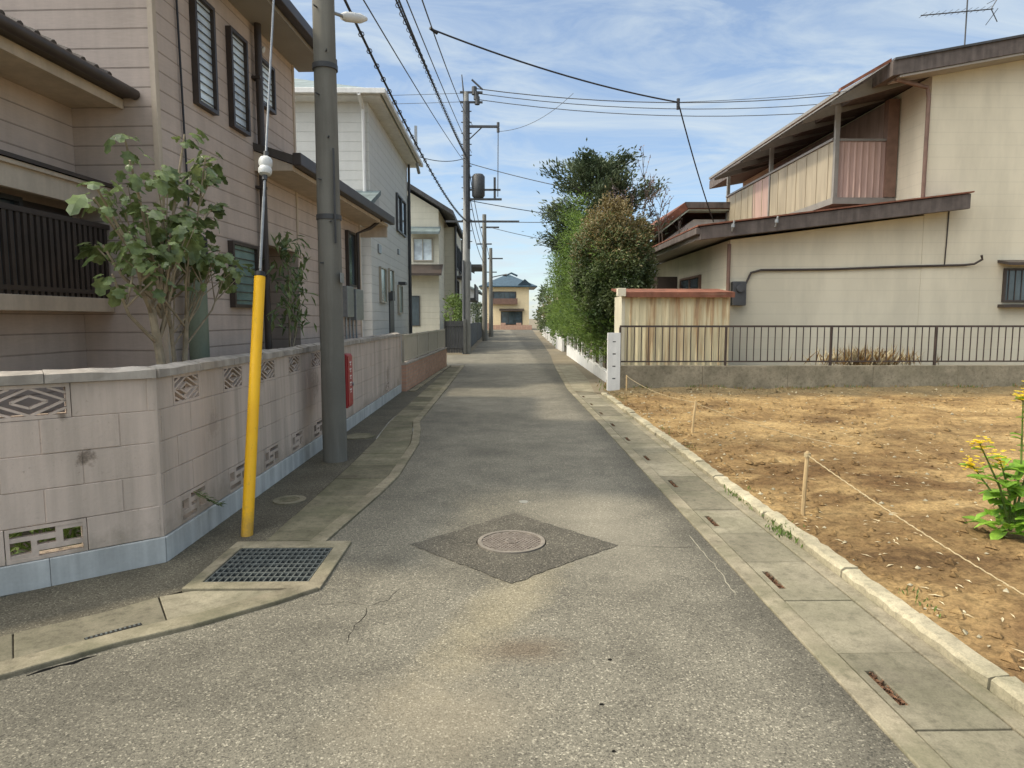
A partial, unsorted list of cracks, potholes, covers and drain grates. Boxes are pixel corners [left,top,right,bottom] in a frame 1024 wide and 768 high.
manhole cover [476,530,546,554]
crack [644,536,736,595]
crack [319,589,399,645]
utility cover [273,495,306,505]
drain grate [182,541,352,593]
